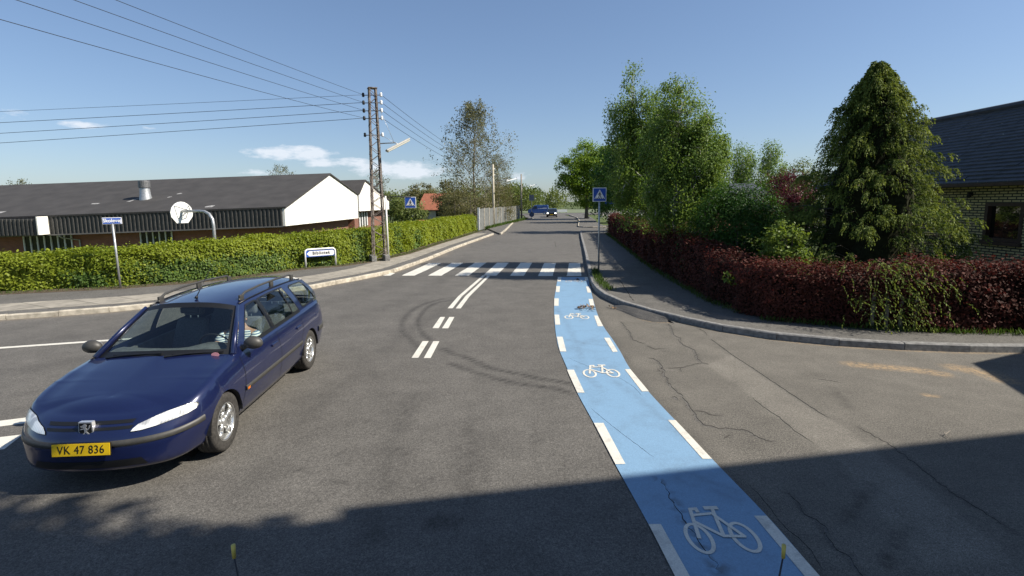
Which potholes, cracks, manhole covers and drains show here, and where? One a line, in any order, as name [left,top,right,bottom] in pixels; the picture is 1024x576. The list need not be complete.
crack [629,324,772,442]
